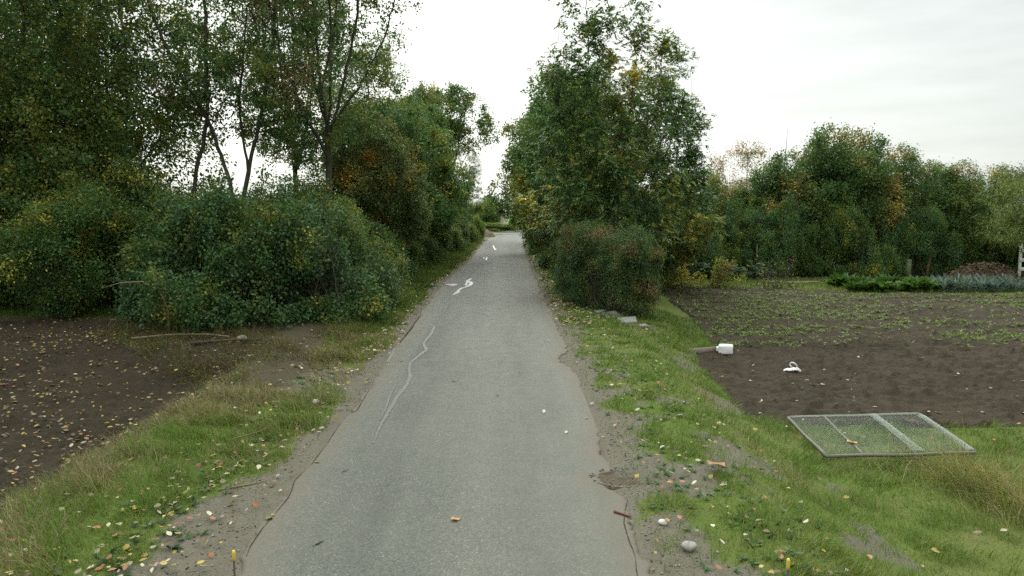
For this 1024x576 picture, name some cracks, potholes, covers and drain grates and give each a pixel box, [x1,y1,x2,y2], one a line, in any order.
pothole [589,467,639,490]
